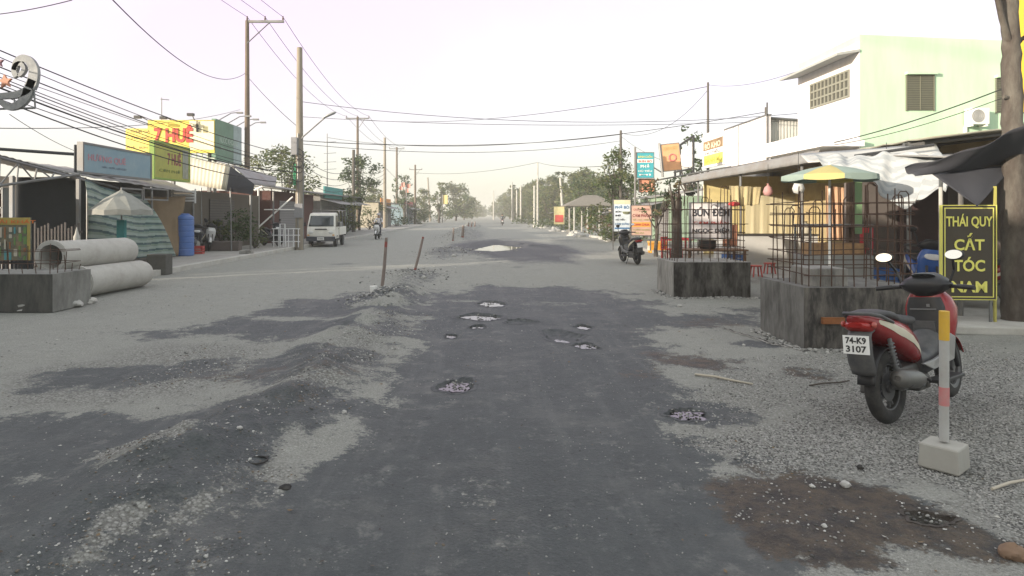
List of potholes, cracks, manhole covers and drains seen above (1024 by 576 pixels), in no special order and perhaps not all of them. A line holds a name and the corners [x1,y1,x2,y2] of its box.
pothole [660,406,715,422]
pothole [473,300,509,308]
pothole [453,240,576,260]
pothole [450,312,508,321]
pothole [538,328,590,344]
pothole [430,376,479,395]
pothole [569,341,605,350]
